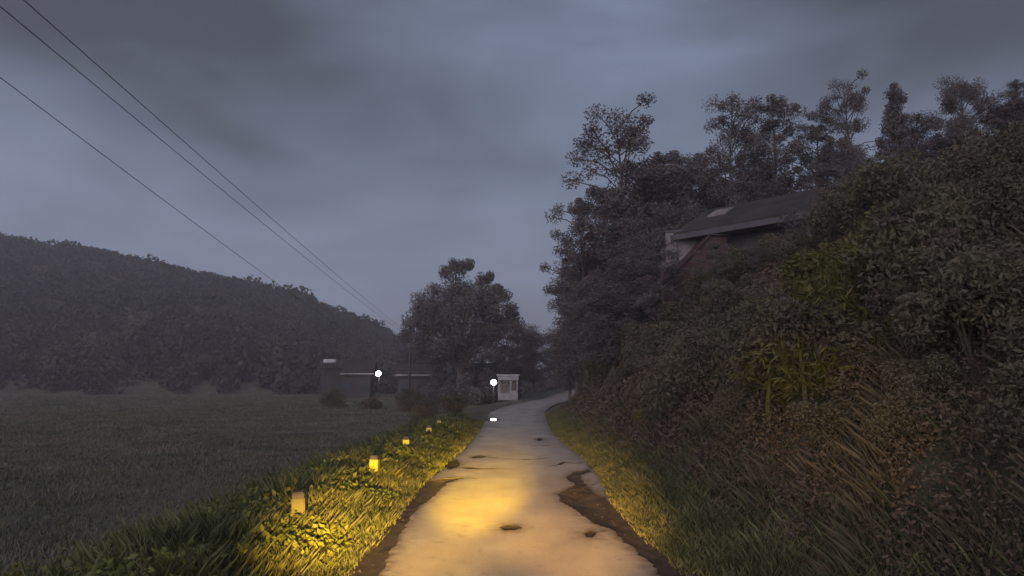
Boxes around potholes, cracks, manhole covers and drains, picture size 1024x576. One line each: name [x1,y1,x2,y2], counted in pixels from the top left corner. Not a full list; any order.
pothole [556,470,696,576]
